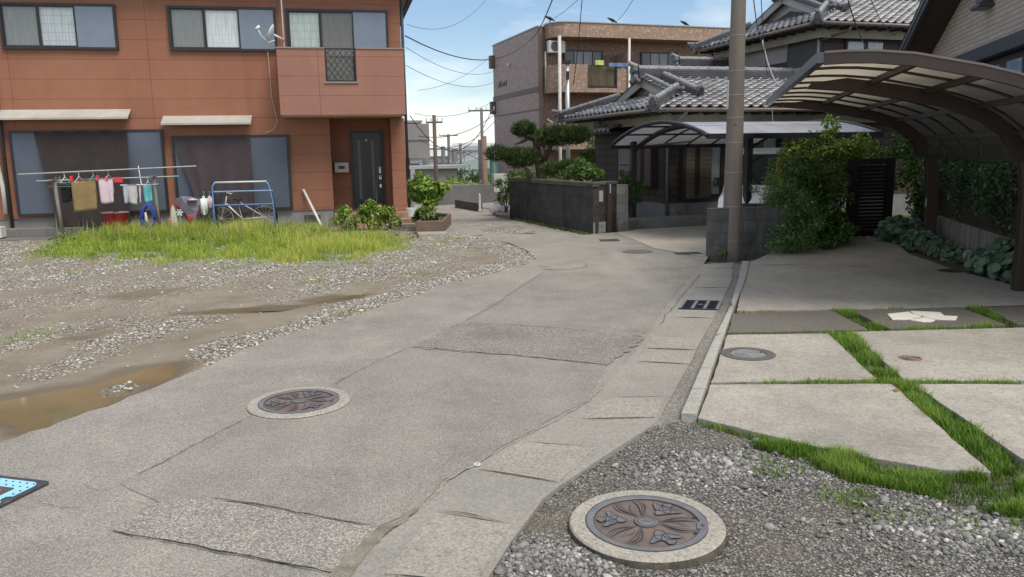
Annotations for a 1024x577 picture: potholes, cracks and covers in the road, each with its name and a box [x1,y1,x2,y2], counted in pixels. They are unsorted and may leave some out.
manhole cover [569,490,726,570]
drain grate [678,300,722,310]
manhole cover [246,387,351,419]
